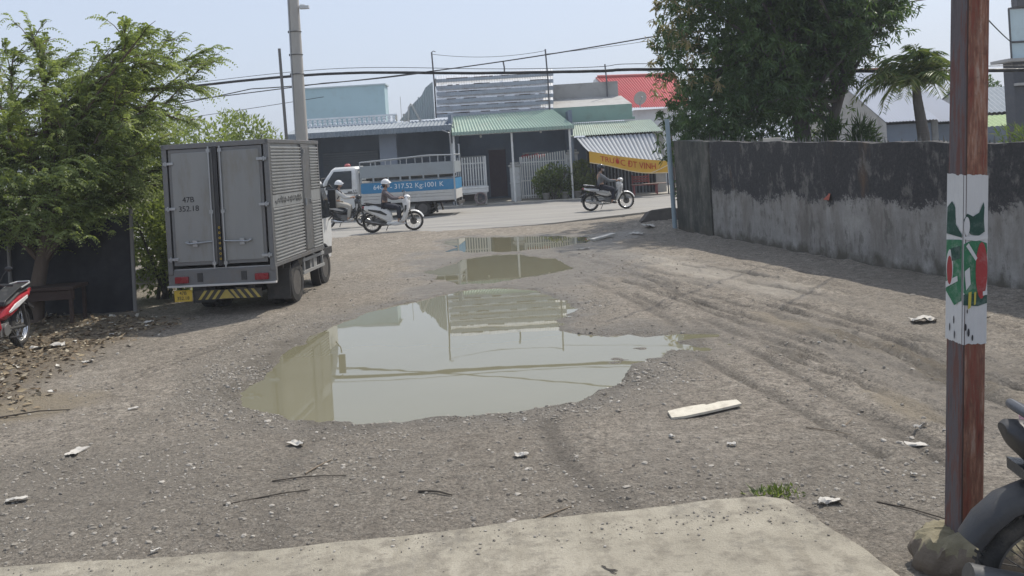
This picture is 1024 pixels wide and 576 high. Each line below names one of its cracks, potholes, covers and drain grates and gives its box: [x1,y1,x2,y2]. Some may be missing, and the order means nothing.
pothole [228,285,732,426]
pothole [419,251,579,285]
pothole [439,235,604,253]
